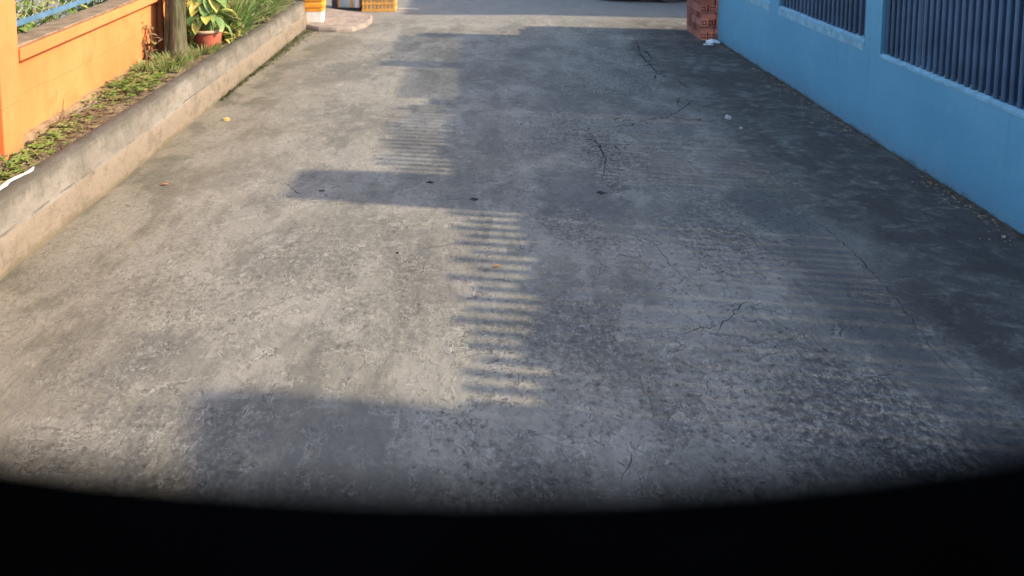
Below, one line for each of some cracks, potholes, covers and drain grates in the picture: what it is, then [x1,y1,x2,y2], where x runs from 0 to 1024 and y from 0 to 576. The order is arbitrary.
crack [684,291,779,339]
crack [588,38,702,187]
